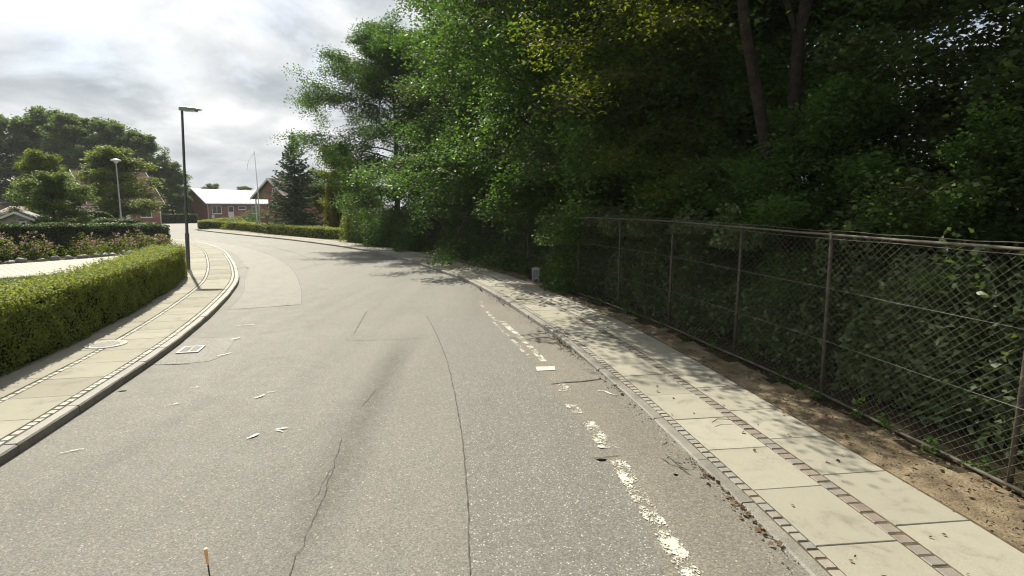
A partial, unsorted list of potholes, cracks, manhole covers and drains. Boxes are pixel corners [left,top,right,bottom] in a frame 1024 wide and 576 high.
crack [289,438,342,576]
manhole cover [83,340,128,349]
drain grate [175,345,206,354]
